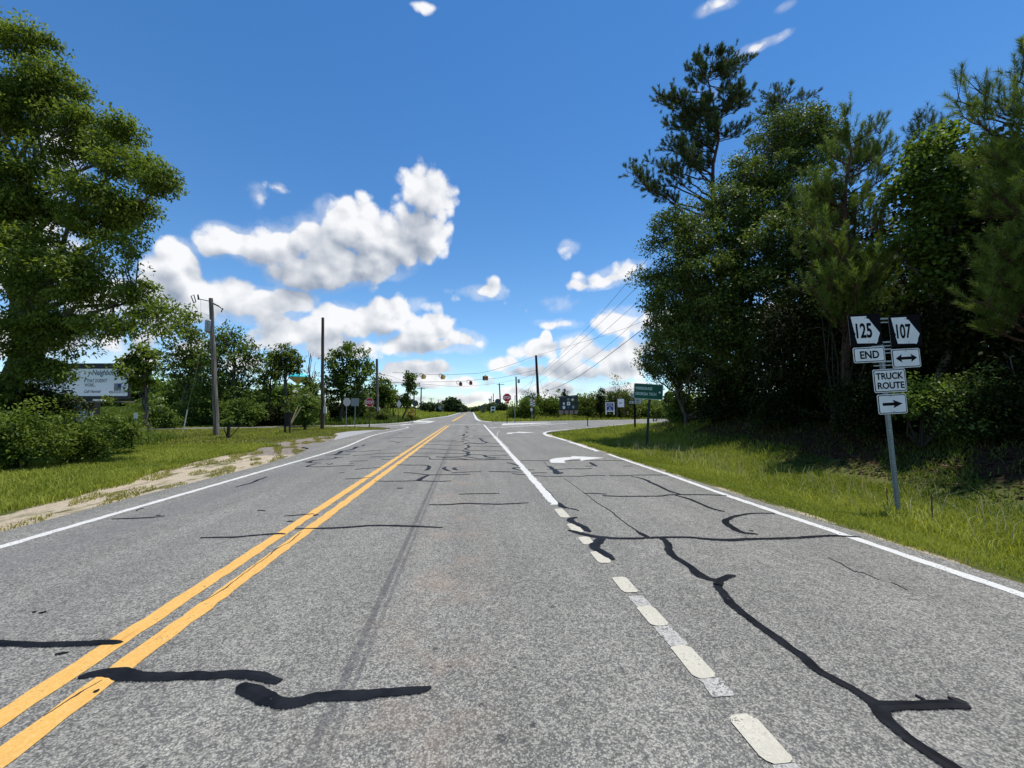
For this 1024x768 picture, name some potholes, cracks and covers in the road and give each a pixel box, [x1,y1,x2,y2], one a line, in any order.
crack [828,557,907,590]
crack [326,430,638,531]
crack [114,508,165,519]
crack [201,513,319,602]
